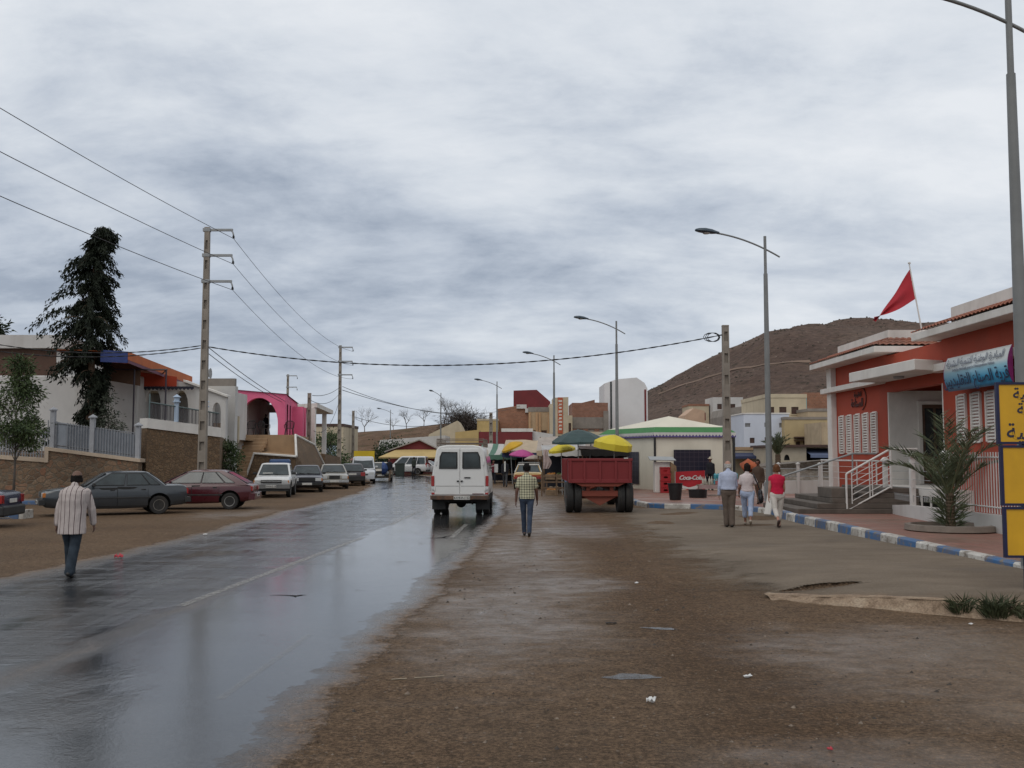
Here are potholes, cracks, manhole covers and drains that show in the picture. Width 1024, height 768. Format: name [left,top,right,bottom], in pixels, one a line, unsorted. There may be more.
pothole [763,580,871,593]
